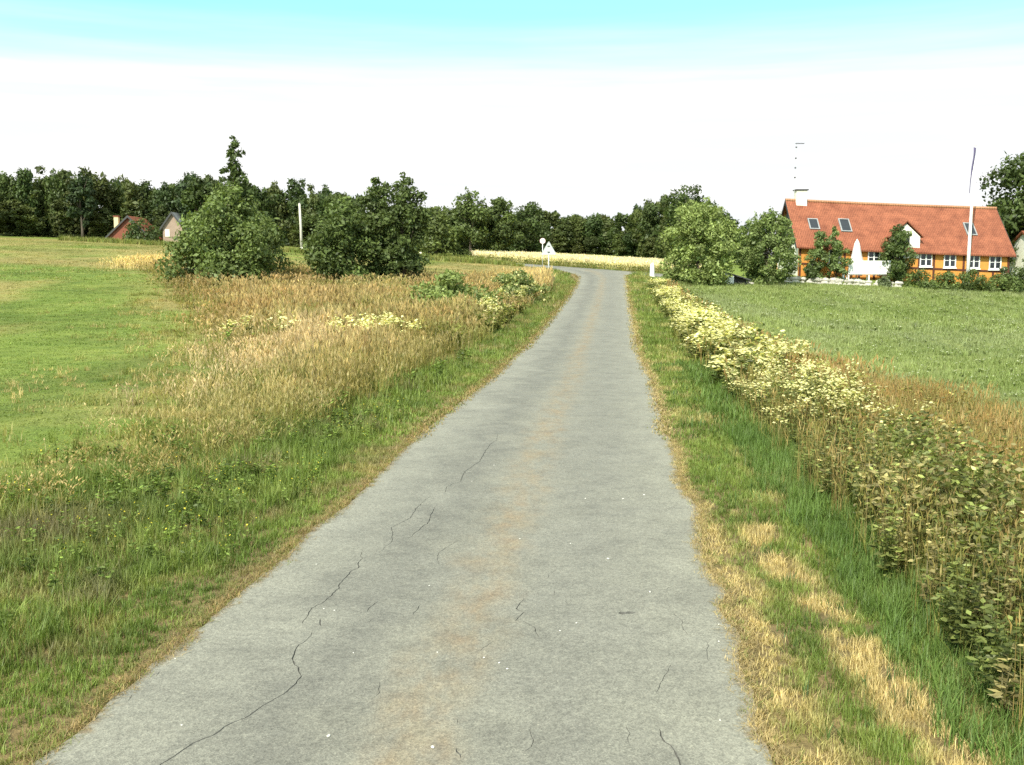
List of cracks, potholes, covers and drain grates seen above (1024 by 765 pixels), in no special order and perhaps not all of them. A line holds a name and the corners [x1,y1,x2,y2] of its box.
crack [380,440,497,552]
crack [659,729,681,765]
crack [160,552,363,765]
